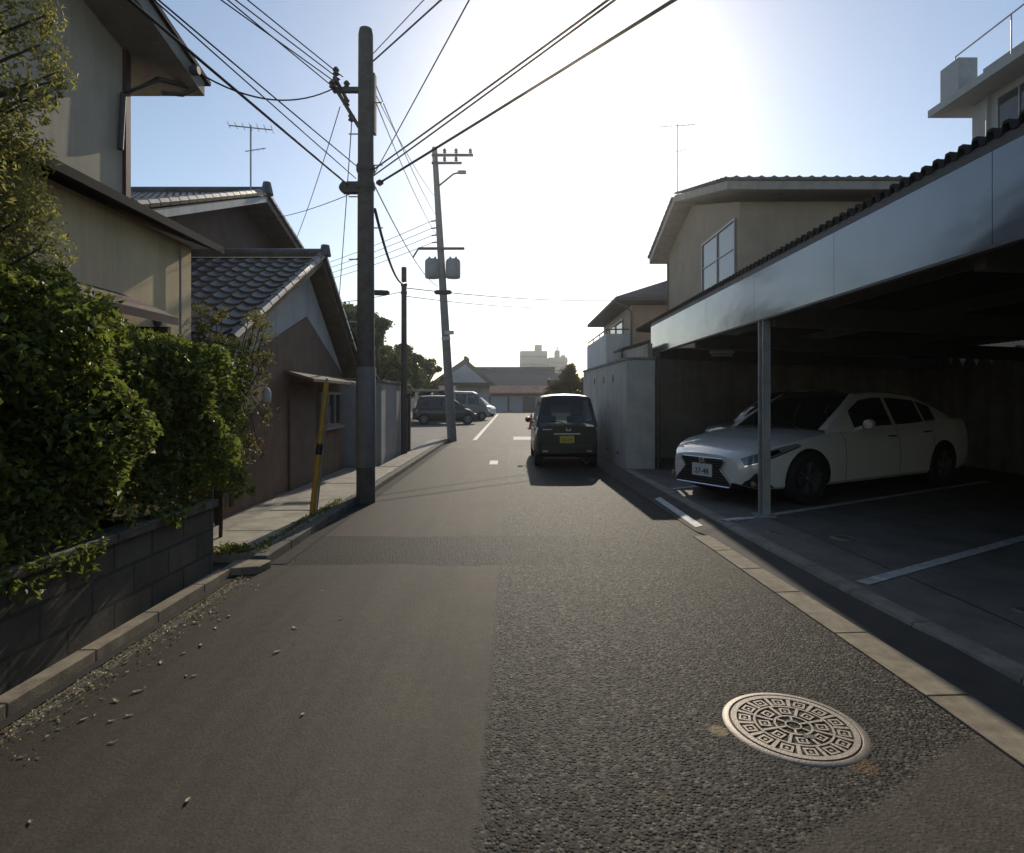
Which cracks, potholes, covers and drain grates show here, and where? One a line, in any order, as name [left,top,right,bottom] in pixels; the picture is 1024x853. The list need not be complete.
manhole cover [722,693,872,767]
